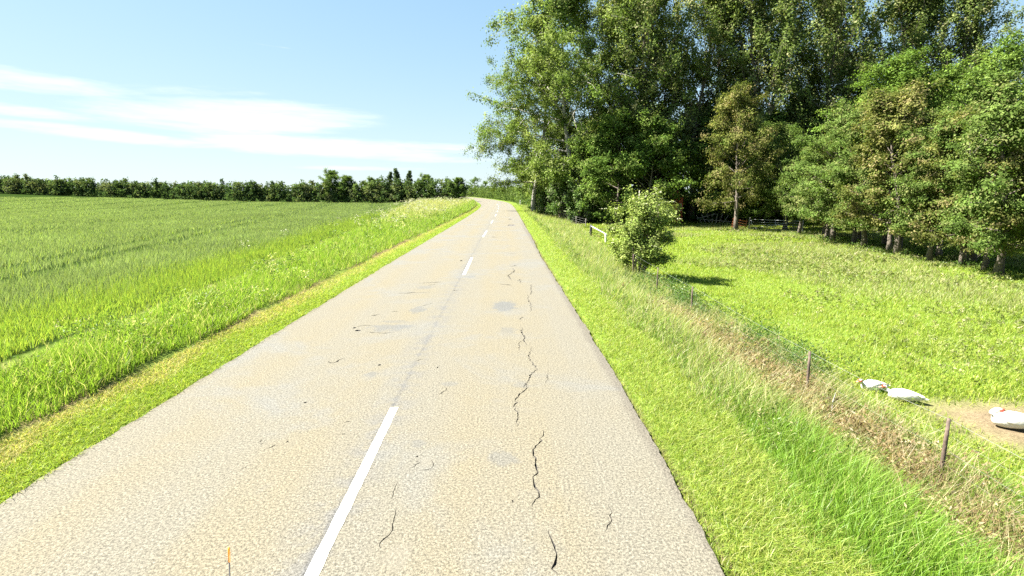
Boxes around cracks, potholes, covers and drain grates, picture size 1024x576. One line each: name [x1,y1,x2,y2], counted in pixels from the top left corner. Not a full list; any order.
crack [503,269,548,510]
crack [379,460,434,548]
crack [548,530,557,573]
